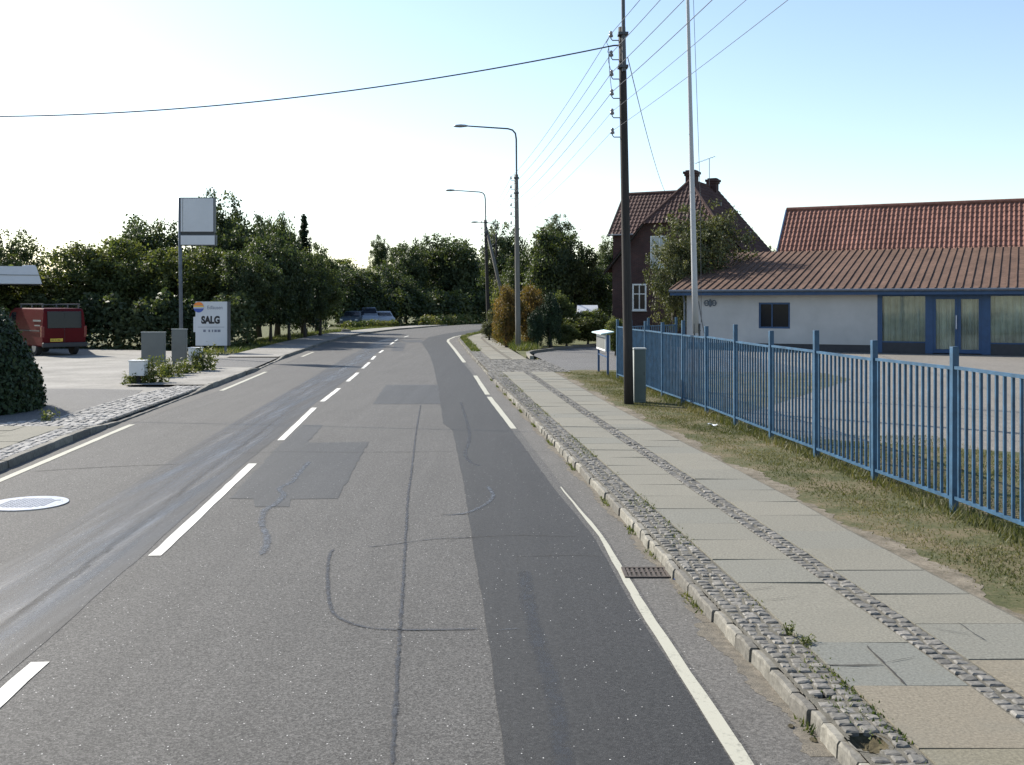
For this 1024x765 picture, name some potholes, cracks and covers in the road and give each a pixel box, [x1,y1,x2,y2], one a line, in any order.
drain grate [621,567,671,578]
pothole [844,733,895,754]
manhole cover [0,496,69,512]
